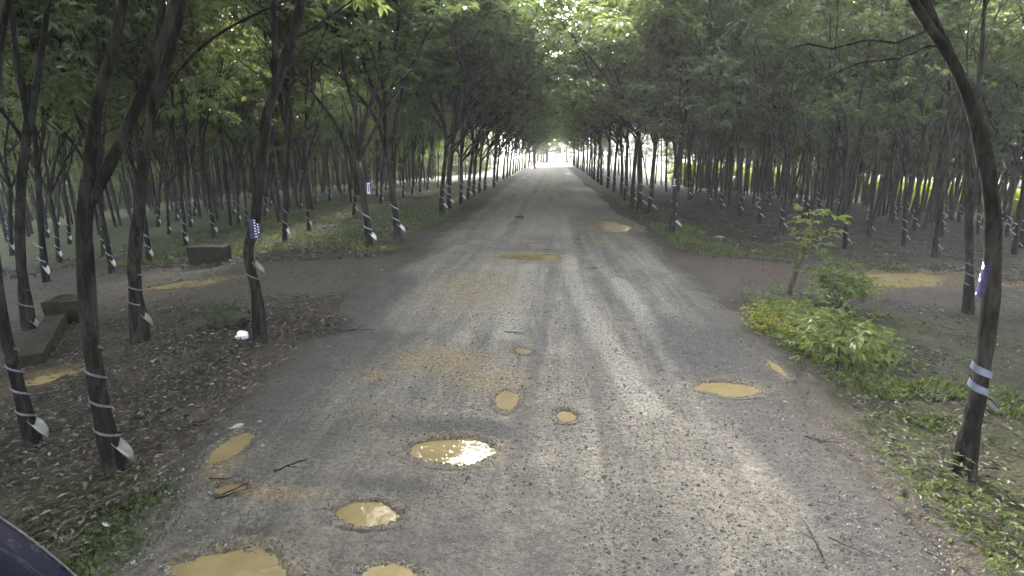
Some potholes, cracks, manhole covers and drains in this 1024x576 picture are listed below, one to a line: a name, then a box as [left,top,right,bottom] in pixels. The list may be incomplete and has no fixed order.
pothole [316,493,420,532]
pothole [580,218,647,235]
pothole [760,354,797,384]
pothole [489,388,525,416]
pothole [207,476,255,497]
pothole [347,559,433,576]
pothole [549,406,582,426]
pothole [141,532,339,576]
pothole [480,250,588,263]
pothole [678,377,784,401]
pothole [509,346,536,356]
pothole [387,430,519,472]
